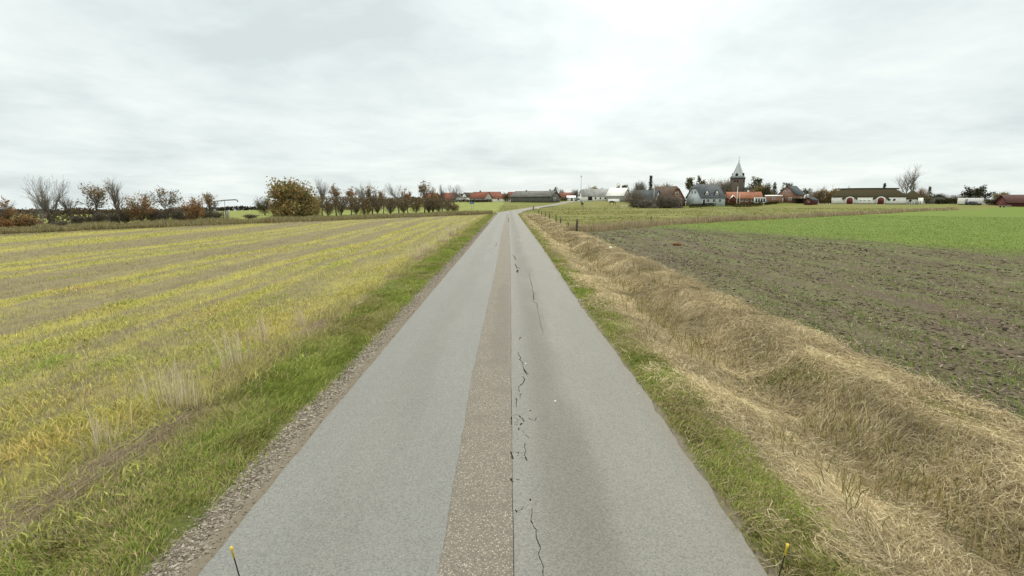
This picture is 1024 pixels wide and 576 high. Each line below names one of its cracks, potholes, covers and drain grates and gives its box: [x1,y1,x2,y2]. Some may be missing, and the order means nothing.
crack [510,337,537,460]
crack [515,508,544,573]
